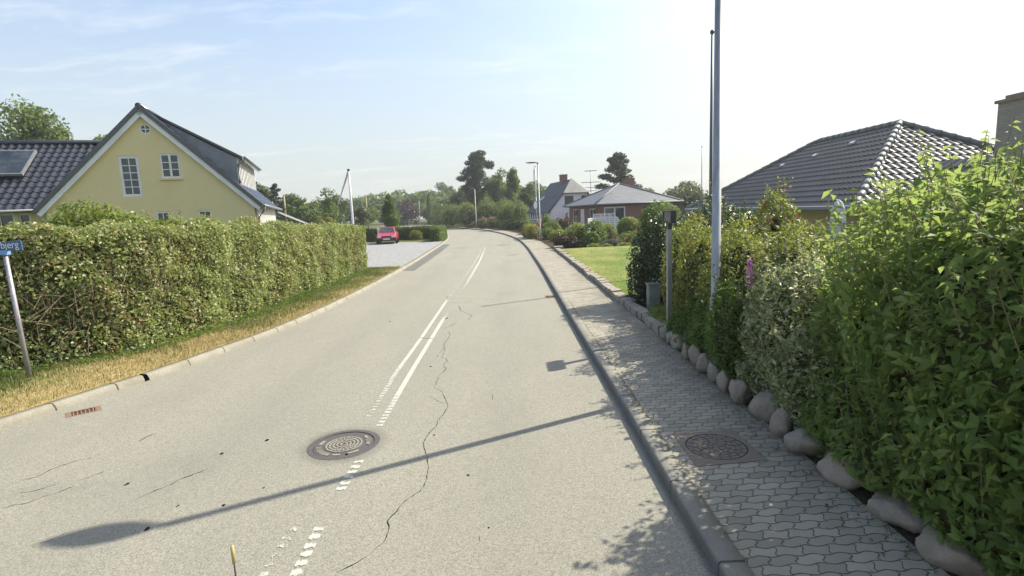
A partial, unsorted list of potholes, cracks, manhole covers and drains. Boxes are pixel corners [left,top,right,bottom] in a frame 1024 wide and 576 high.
manhole cover [673,430,768,467]
crack [2,458,102,509]
drain grate [65,406,102,418]
crack [337,334,451,573]
manhole cover [307,430,380,460]
